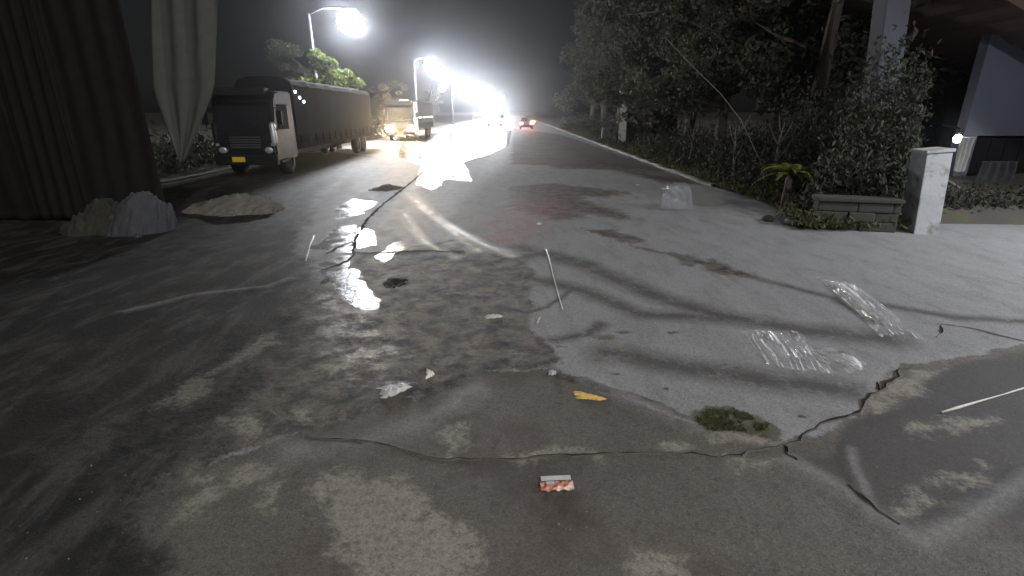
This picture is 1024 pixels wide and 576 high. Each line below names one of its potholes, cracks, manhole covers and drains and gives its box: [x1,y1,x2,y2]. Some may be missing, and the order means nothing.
crack [936,323,1024,342]
crack [323,169,464,270]
pothole [384,278,409,289]
crack [304,366,913,461]
crack [847,484,900,525]
